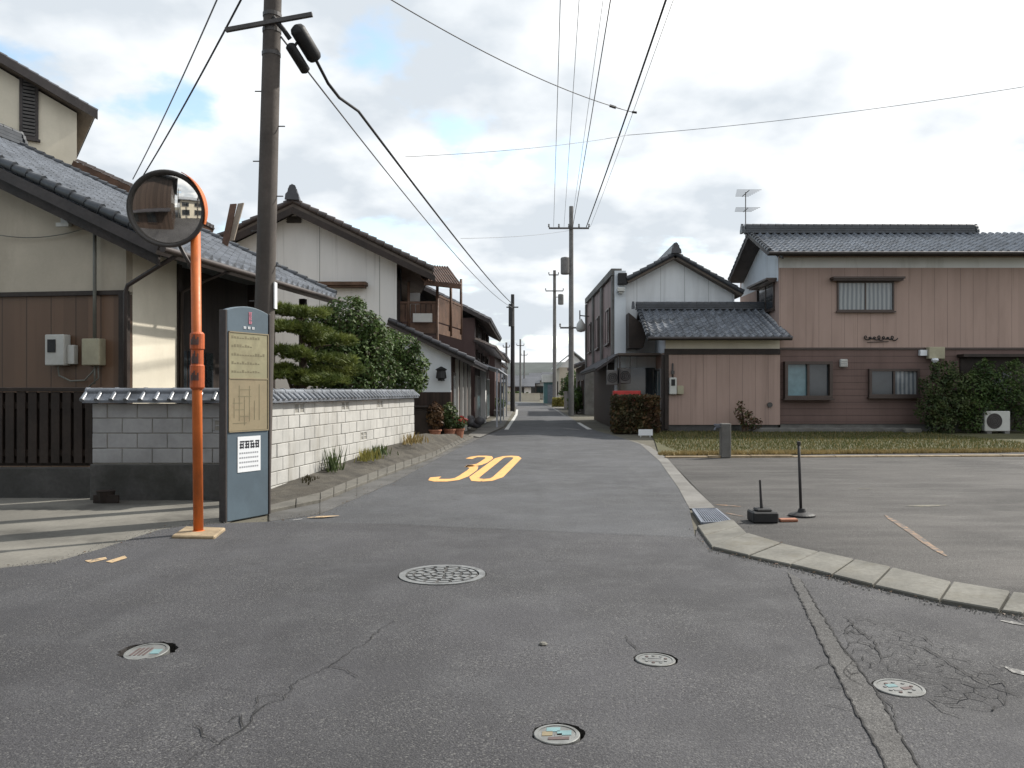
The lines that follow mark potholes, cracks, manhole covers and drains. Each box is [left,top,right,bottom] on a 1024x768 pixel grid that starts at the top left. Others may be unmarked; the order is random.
crack [188,621,394,760]
drain grate [692,508,731,525]
manhole cover [532,722,585,746]
manhole cover [871,678,927,698]
crack [789,576,1020,768]
manhole cover [116,642,179,660]
manhole cover [634,652,678,667]
manhole cover [398,565,487,585]
